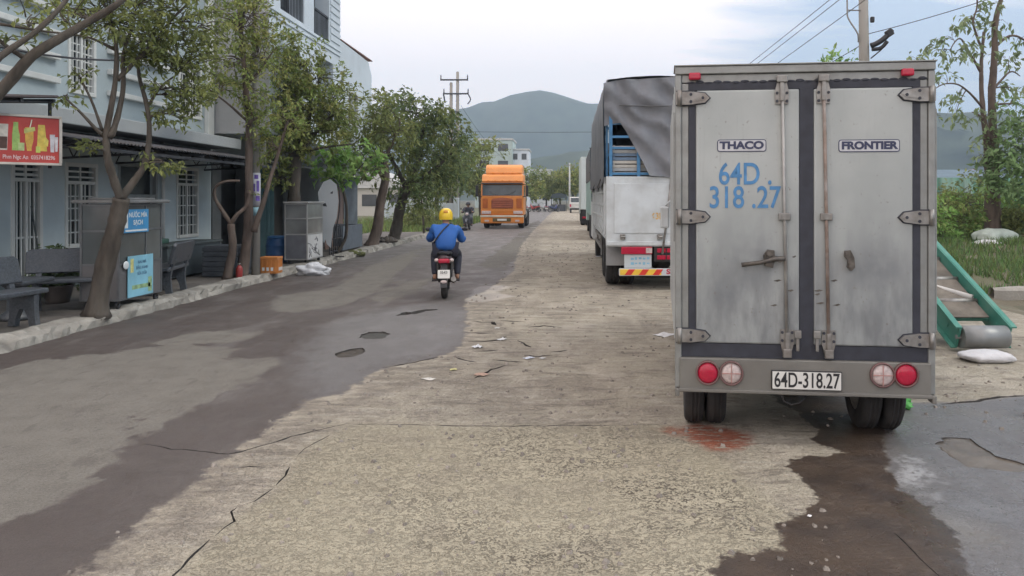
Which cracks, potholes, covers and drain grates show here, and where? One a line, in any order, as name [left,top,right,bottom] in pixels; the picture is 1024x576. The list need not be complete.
pothole [335,348,365,358]
pothole [934,437,1024,472]
crack [894,533,939,576]
crack [146,424,344,576]
